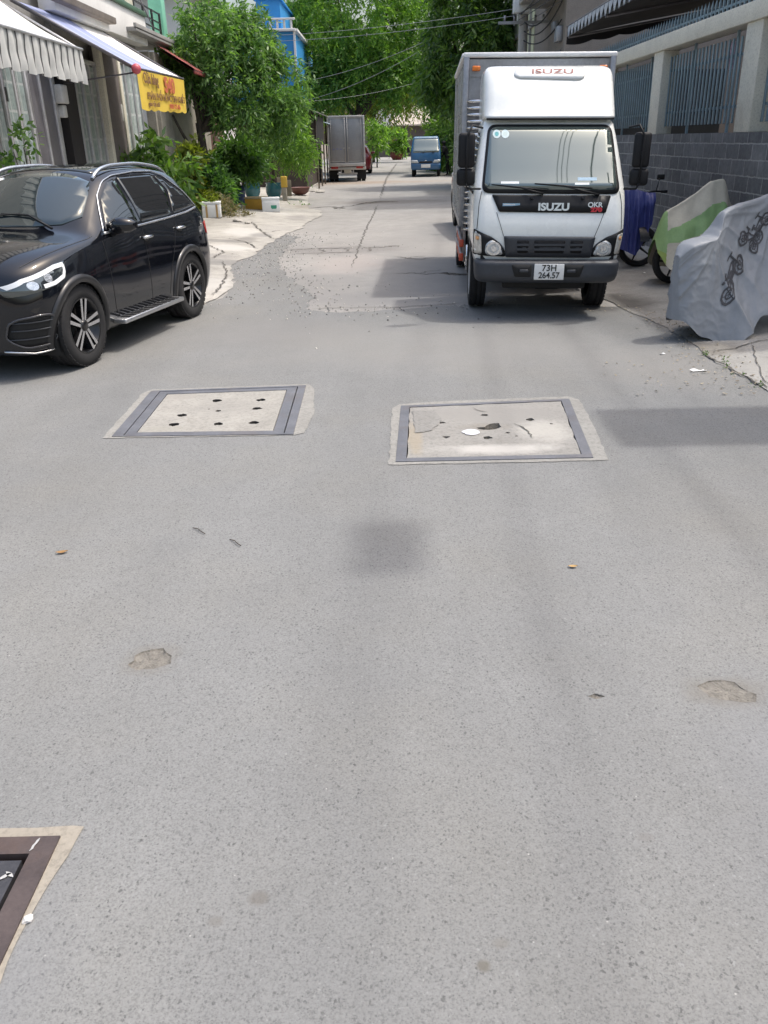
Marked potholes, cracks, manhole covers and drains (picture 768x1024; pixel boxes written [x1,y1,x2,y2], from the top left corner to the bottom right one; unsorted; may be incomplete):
crack [703,339,768,387]
manhole cover [0,825,84,982]
manhole cover [388,396,608,465]
manhole cover [103,384,315,438]
crack [210,222,273,294]
